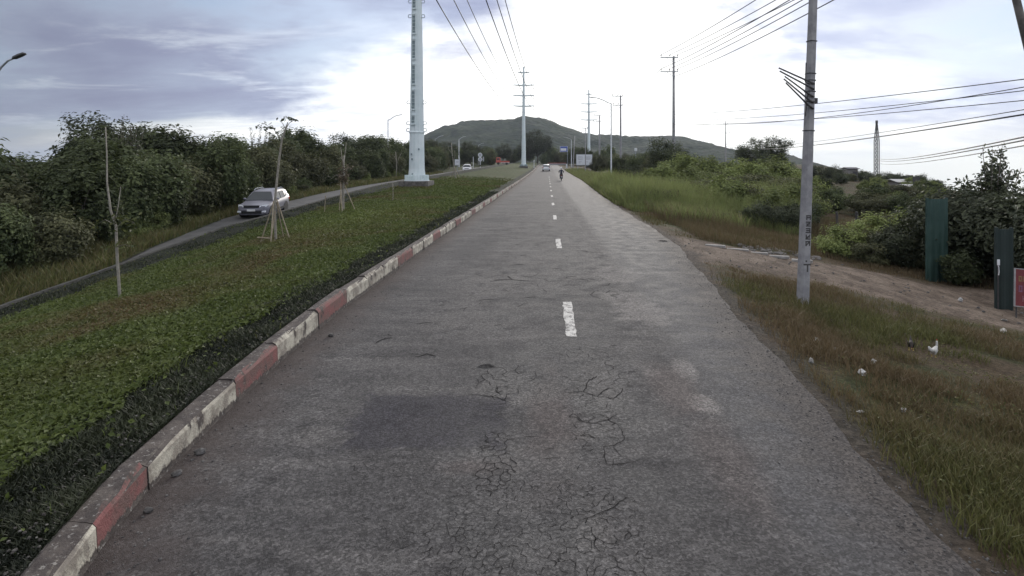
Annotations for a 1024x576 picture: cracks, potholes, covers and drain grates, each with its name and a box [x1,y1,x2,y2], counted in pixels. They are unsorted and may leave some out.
crack [344,432,648,576]
crack [561,345,649,469]
crack [465,365,545,410]
